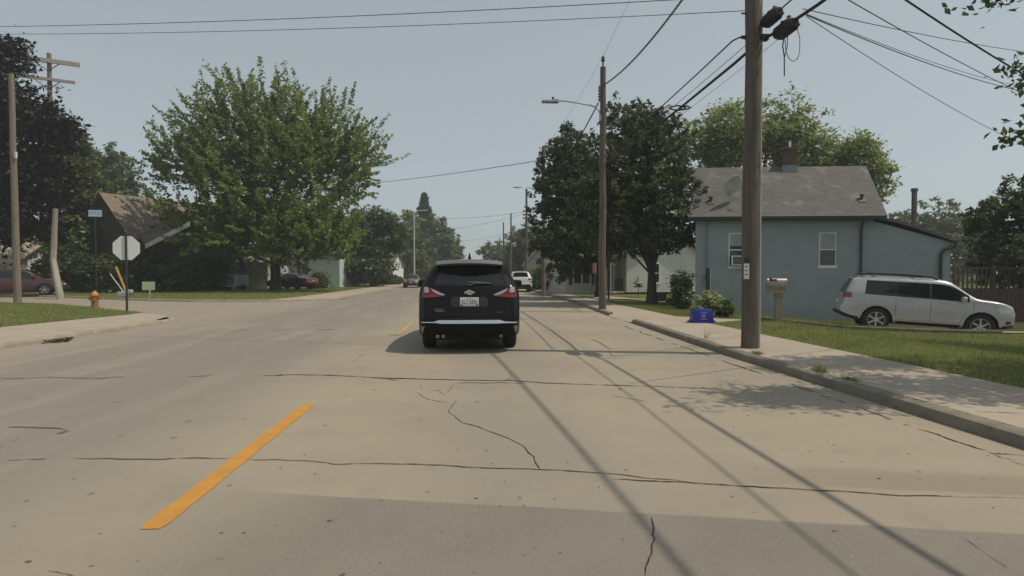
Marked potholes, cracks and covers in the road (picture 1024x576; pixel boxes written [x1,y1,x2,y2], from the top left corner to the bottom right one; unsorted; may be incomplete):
crack [419,373,539,467]
crack [645,517,655,574]
